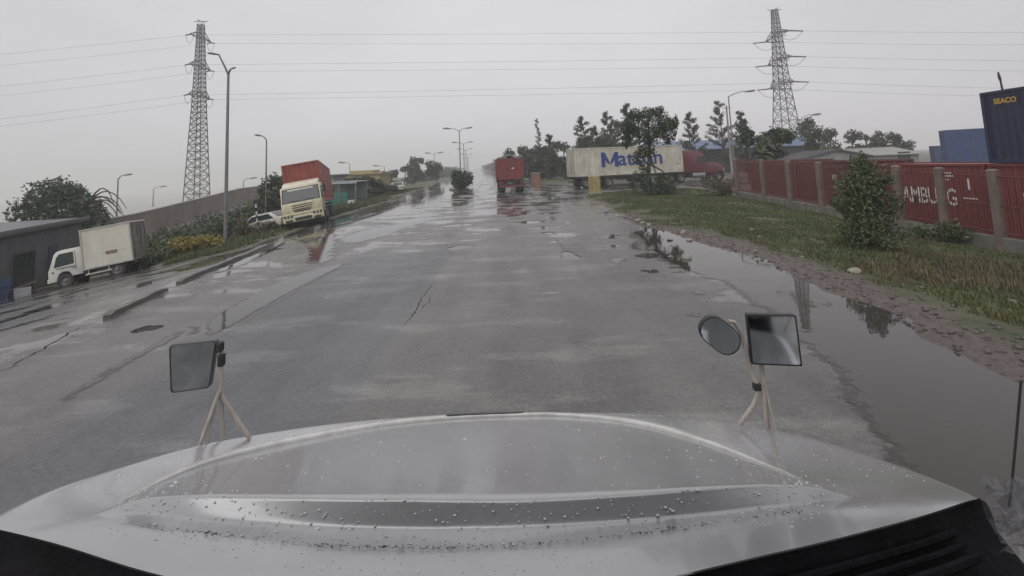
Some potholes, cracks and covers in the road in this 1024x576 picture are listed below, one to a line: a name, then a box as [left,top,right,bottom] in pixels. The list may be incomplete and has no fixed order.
pothole [561,251,581,260]
pothole [130,325,164,334]
crack [2,325,86,371]
